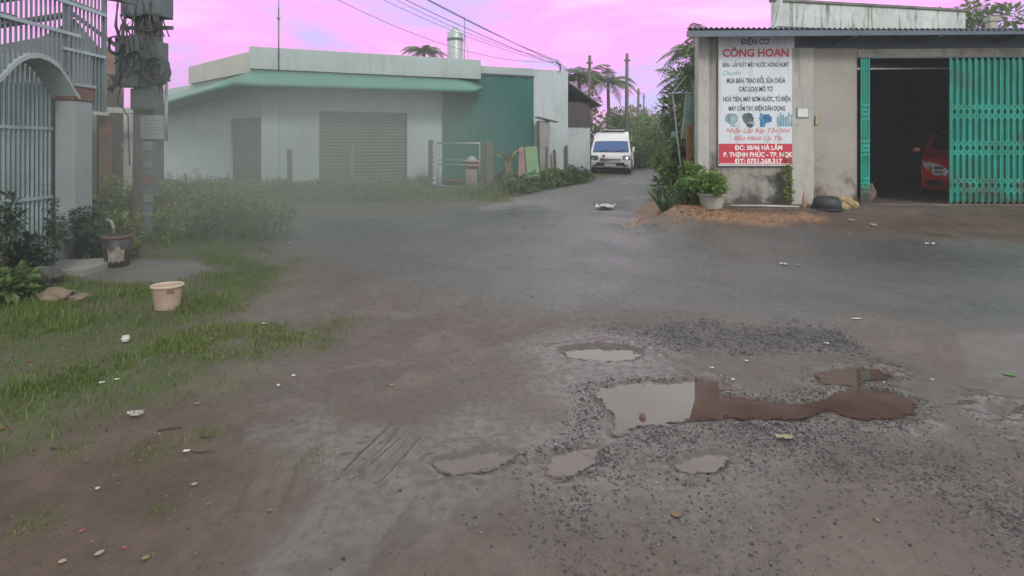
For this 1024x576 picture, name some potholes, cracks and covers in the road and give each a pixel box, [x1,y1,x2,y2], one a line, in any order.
pothole [977,399,1024,418]
pothole [556,341,653,363]
pothole [528,442,606,485]
pothole [426,445,524,478]
pothole [669,447,739,476]
pothole [577,363,927,458]
